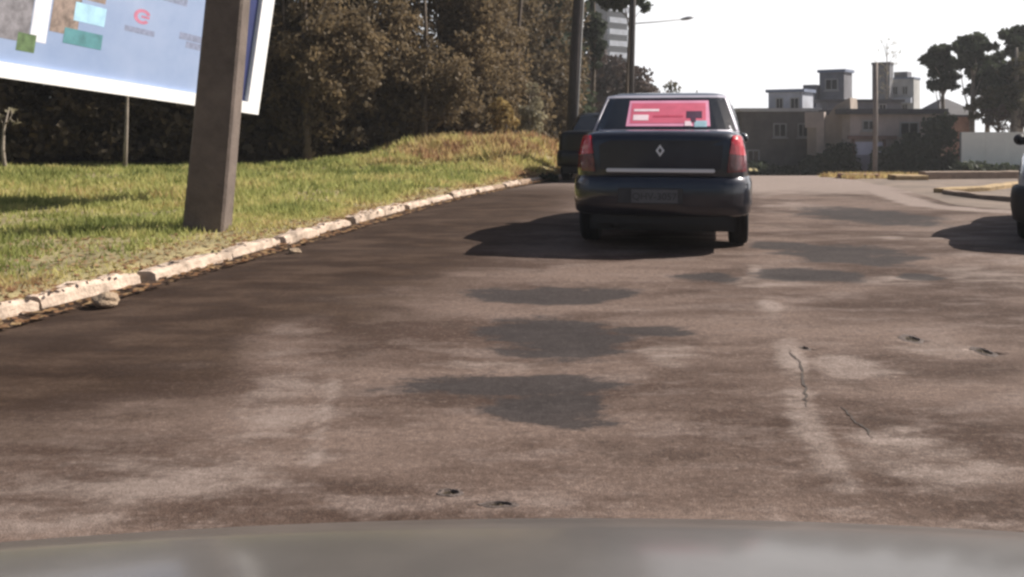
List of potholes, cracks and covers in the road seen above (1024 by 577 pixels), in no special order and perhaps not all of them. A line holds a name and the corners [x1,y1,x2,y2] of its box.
crack [841,405,873,438]
pothole [436,488,464,497]
pothole [969,346,999,357]
pothole [897,334,924,344]
crack [789,350,808,406]
